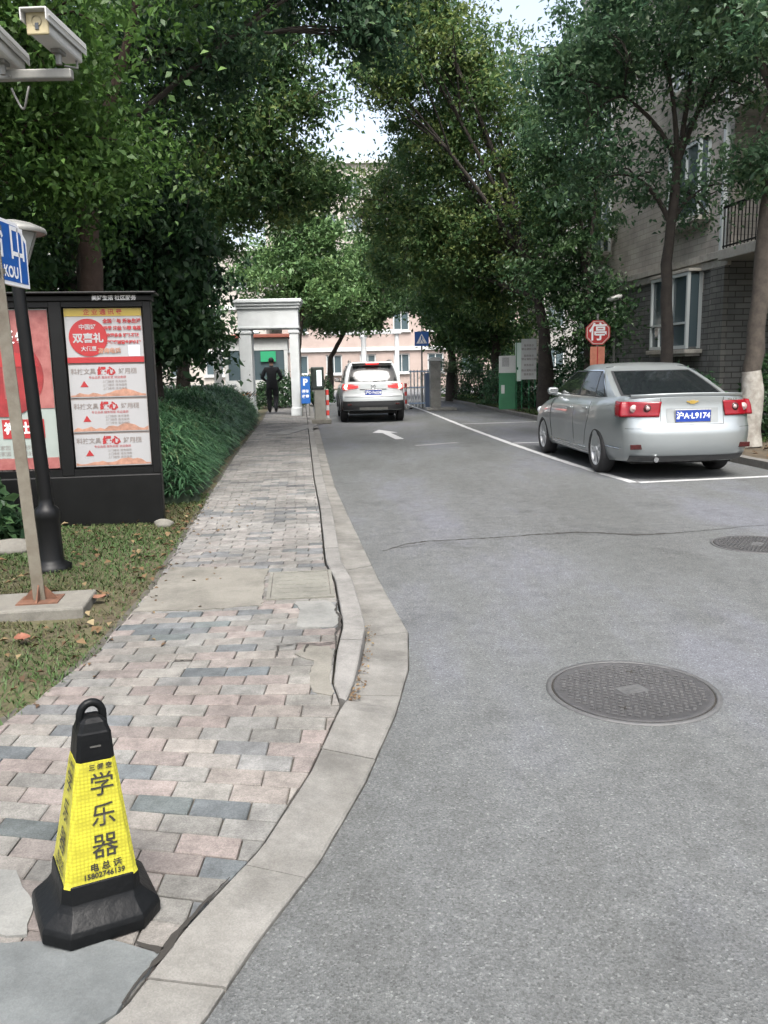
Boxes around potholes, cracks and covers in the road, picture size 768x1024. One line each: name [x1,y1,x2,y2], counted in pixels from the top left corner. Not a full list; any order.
crack [383,525,760,551]
manhole cover [710,535,768,554]
manhole cover [546,661,723,726]
